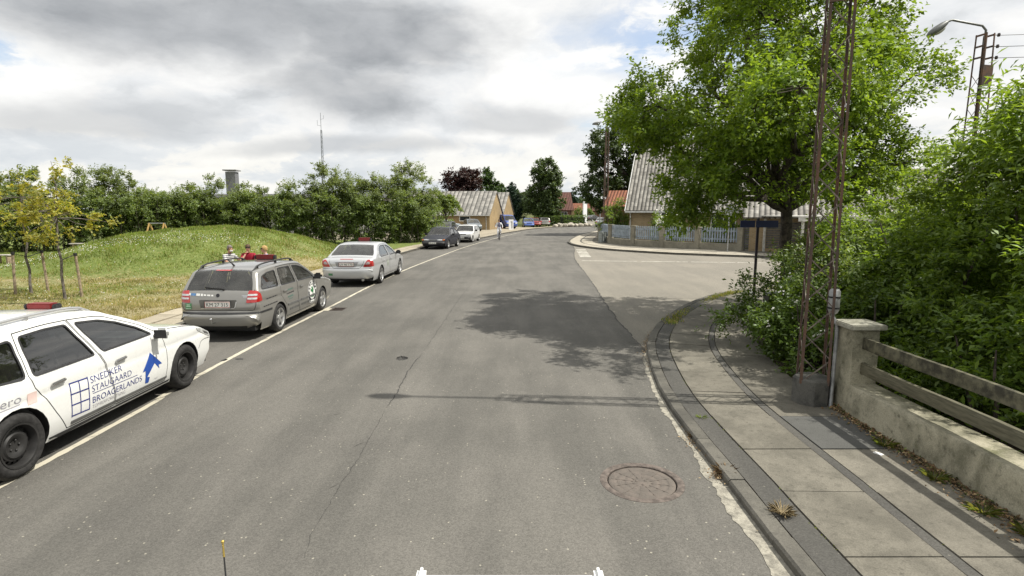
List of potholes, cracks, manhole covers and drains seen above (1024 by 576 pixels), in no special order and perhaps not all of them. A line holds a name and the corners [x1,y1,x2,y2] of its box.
manhole cover [600,463,685,503]
